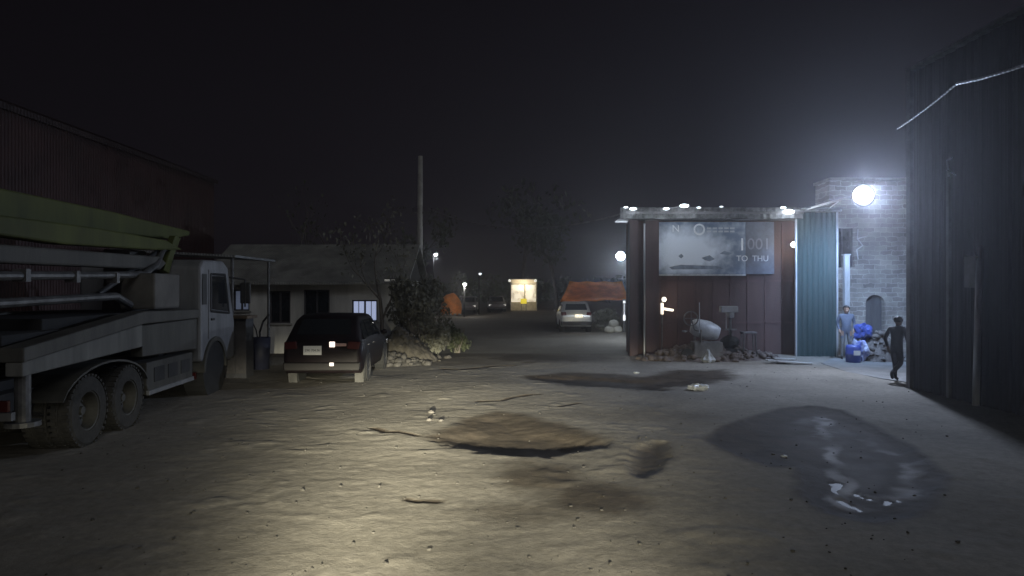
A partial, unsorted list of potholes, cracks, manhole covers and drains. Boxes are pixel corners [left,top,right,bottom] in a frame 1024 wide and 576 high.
crack [367,427,422,437]
pothole [526,369,735,391]
crack [402,497,448,505]
crack [475,394,583,408]
pothole [423,410,613,459]
pothole [623,440,674,478]
pothole [710,406,944,522]
